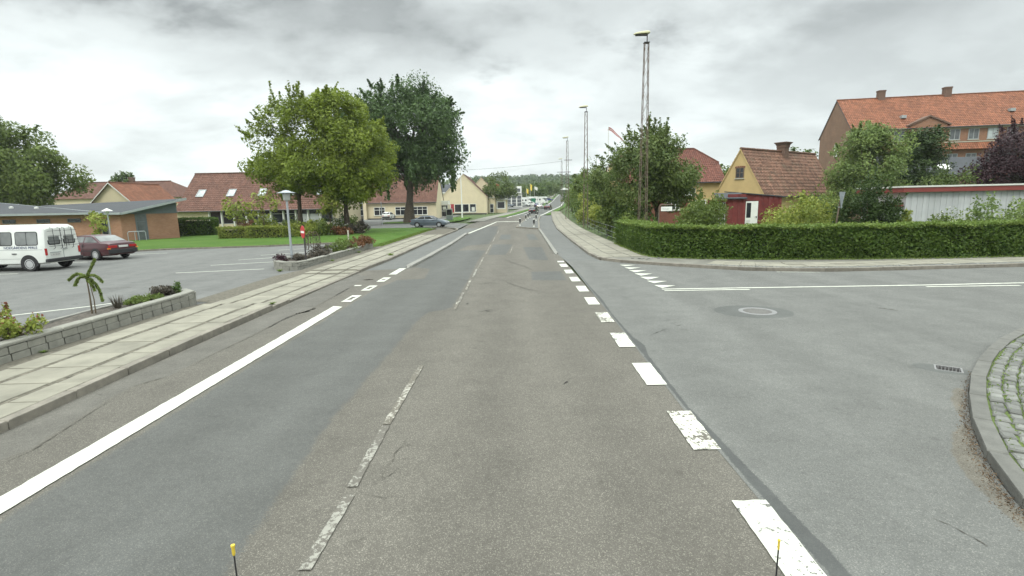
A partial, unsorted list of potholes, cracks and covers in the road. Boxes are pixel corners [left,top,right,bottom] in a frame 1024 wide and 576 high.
drain grate [934,364,964,373]
crack [354,440,413,542]
manhole cover [738,307,777,315]
